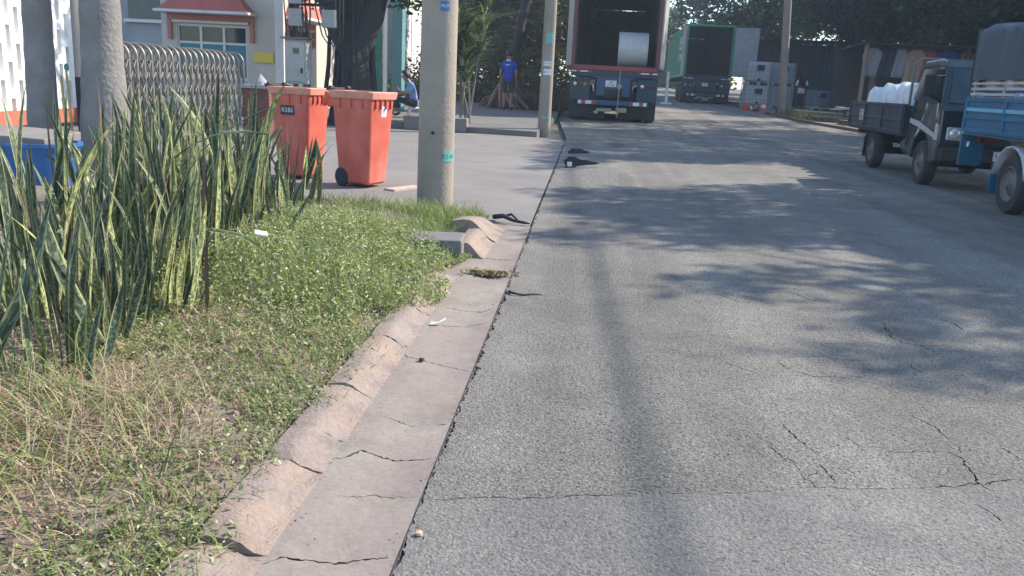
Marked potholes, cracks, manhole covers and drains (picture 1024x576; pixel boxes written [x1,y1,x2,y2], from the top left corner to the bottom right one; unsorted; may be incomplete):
crack [879,416,1006,524]
crack [778,356,870,378]
crack [337,450,430,461]
crack [876,319,965,373]
